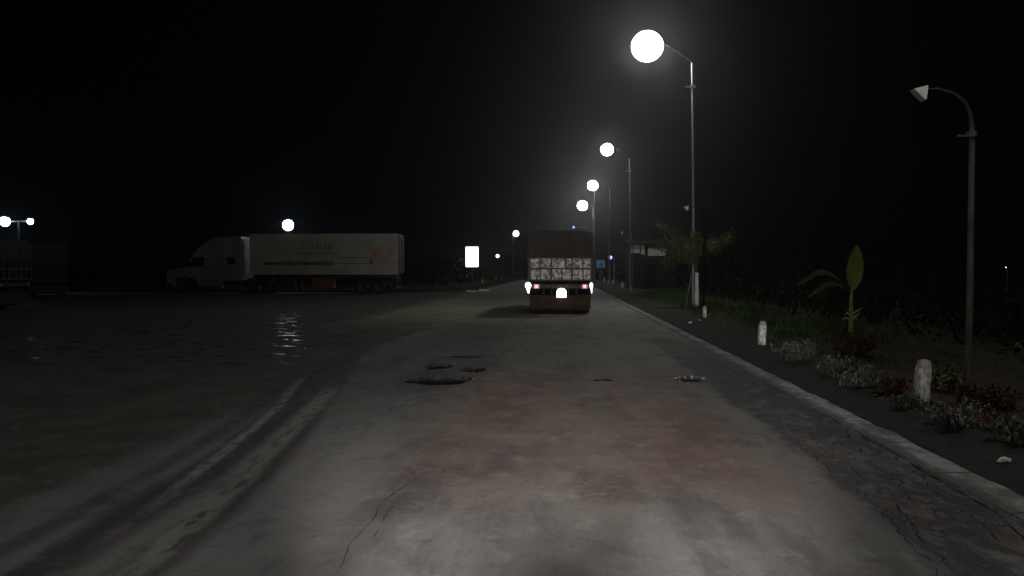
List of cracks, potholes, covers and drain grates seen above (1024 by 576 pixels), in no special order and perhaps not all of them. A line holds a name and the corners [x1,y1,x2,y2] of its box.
crack [337,473,425,572]
pothole [404,375,475,386]
crack [753,408,1024,576]
